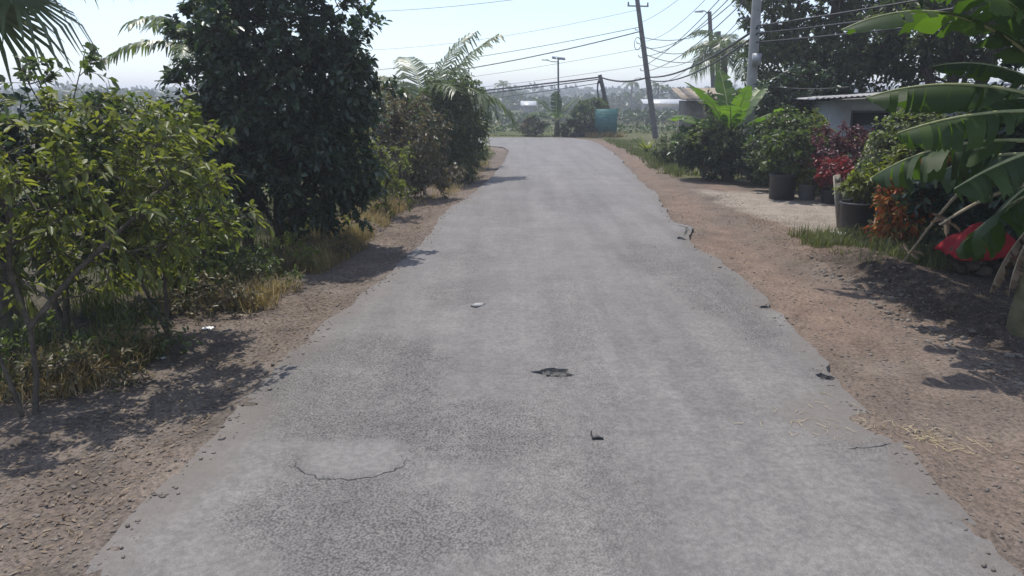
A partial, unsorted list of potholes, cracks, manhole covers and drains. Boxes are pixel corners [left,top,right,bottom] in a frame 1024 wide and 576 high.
pothole [531,368,574,378]
